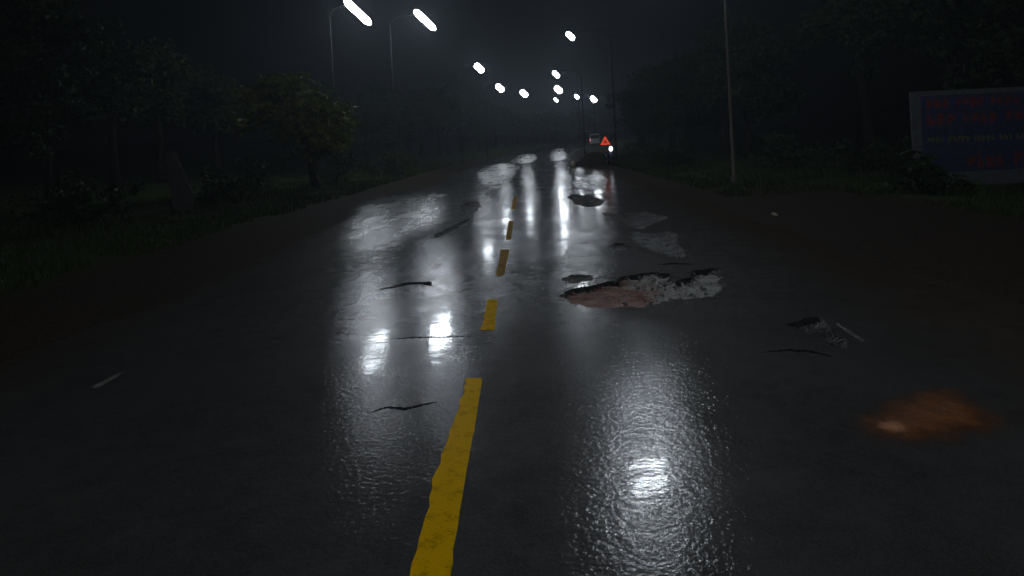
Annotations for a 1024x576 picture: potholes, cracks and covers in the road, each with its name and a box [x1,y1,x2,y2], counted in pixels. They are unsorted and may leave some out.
crack [763,349,832,357]
crack [380,281,432,290]
crack [431,216,473,239]
crack [372,402,435,412]
pothole [524,264,750,316]
pothole [787,317,848,349]
pothole [567,194,606,207]
